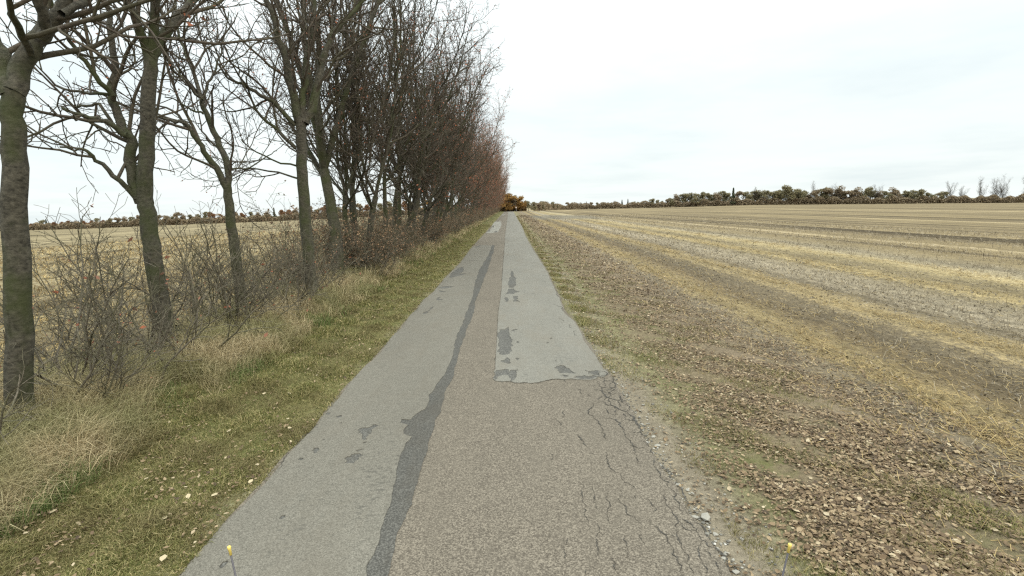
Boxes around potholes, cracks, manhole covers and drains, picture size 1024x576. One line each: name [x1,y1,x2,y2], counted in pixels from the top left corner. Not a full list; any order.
crack [546,371,732,575]
